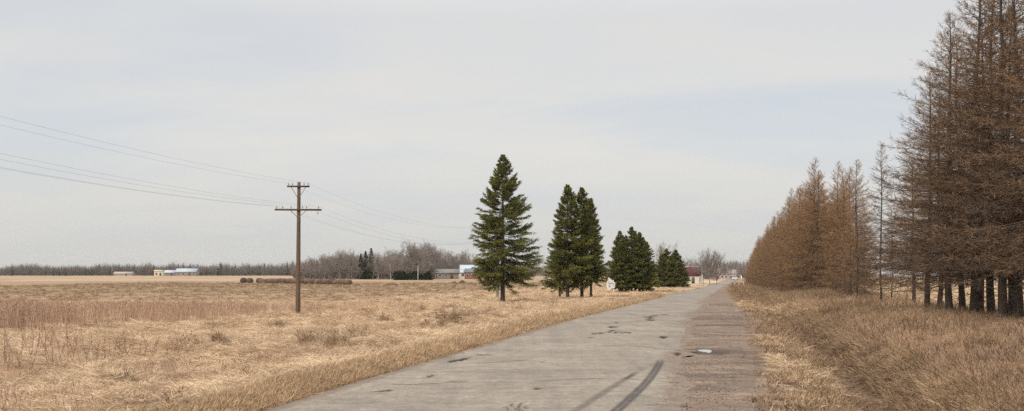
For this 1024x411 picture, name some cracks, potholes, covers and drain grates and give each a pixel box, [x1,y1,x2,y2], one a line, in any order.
pothole [677,346,746,356]
